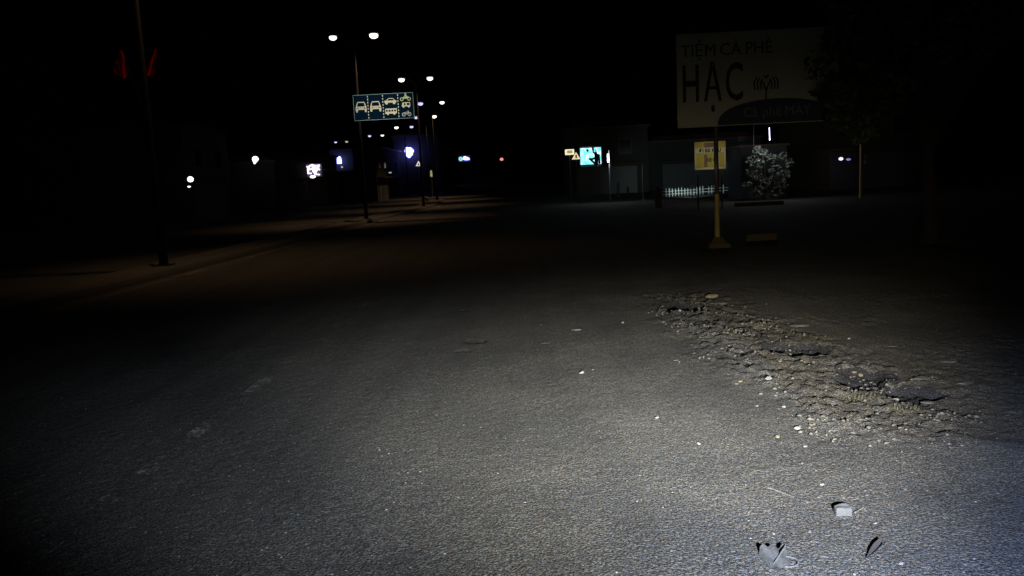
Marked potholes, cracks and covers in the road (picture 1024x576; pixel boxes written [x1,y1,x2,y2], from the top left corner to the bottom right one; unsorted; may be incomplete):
pothole [829,364,901,392]
pothole [878,385,951,405]
pothole [655,300,713,313]
pothole [760,341,831,357]
